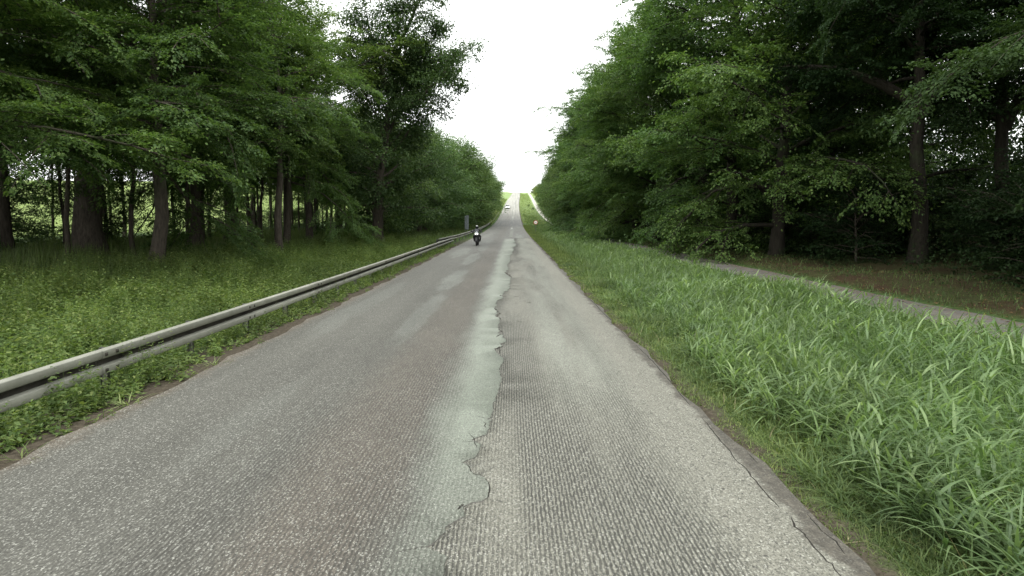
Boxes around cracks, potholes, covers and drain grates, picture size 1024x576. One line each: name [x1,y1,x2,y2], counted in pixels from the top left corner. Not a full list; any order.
crack [462,416,490,497]
